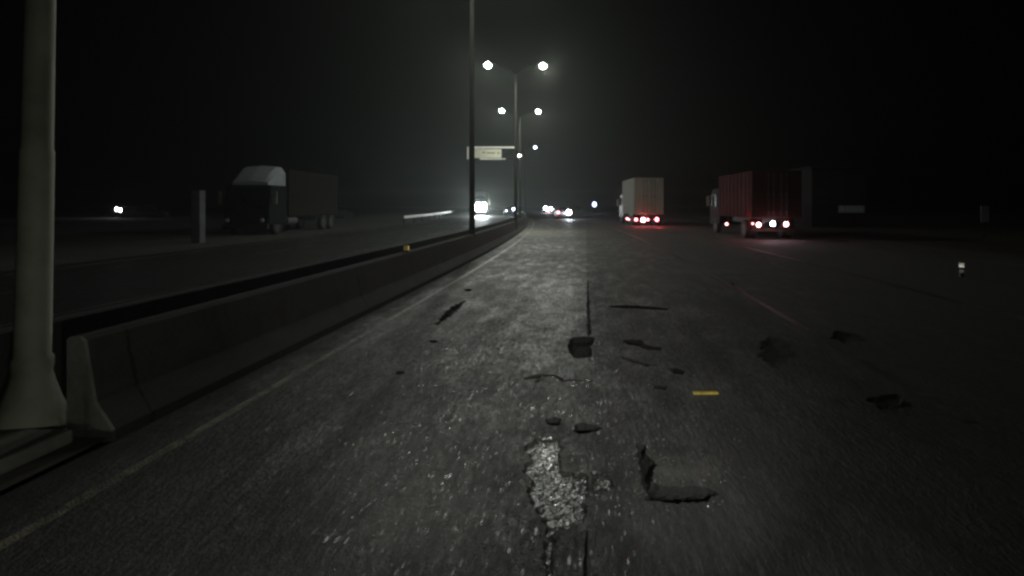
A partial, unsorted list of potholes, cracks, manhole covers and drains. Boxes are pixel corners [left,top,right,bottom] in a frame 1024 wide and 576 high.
crack [621,356,658,366]
pothole [636,444,720,504]
pothole [866,394,915,414]
pothole [434,300,466,325]
pothole [545,417,562,426]
pothole [830,331,869,346]
pothole [757,335,803,370]
pothole [521,436,589,576]
crack [524,373,591,382]
pothole [573,422,603,434]
pothole [567,336,595,358]
pothole [623,339,663,351]
